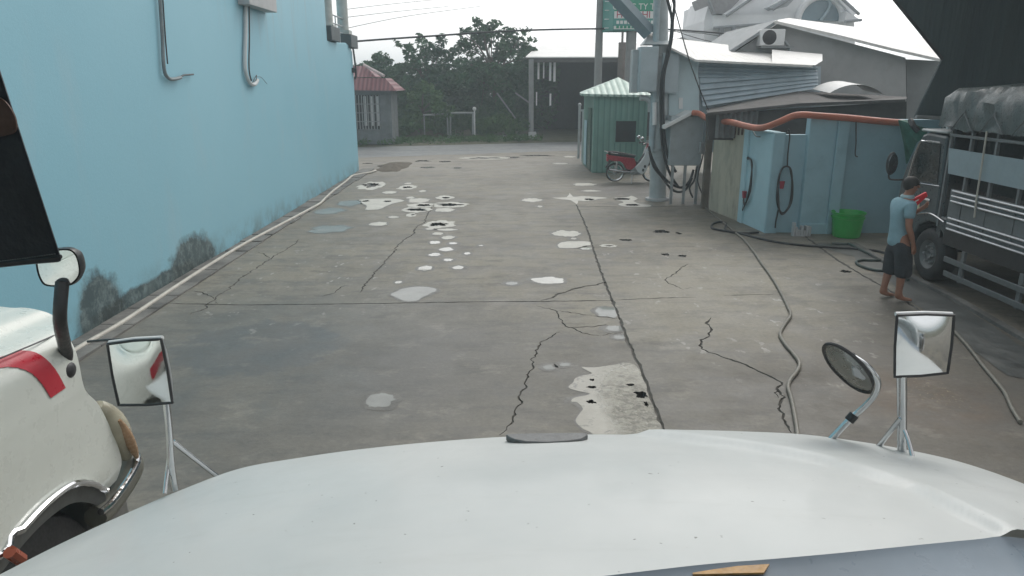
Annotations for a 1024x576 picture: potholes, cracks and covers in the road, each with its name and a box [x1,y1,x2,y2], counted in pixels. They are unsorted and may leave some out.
crack [500,306,620,435]
pothole [422,220,456,229]
crack [361,208,432,291]
pothole [357,182,385,190]
crack [193,239,299,313]
crack [698,318,791,432]
